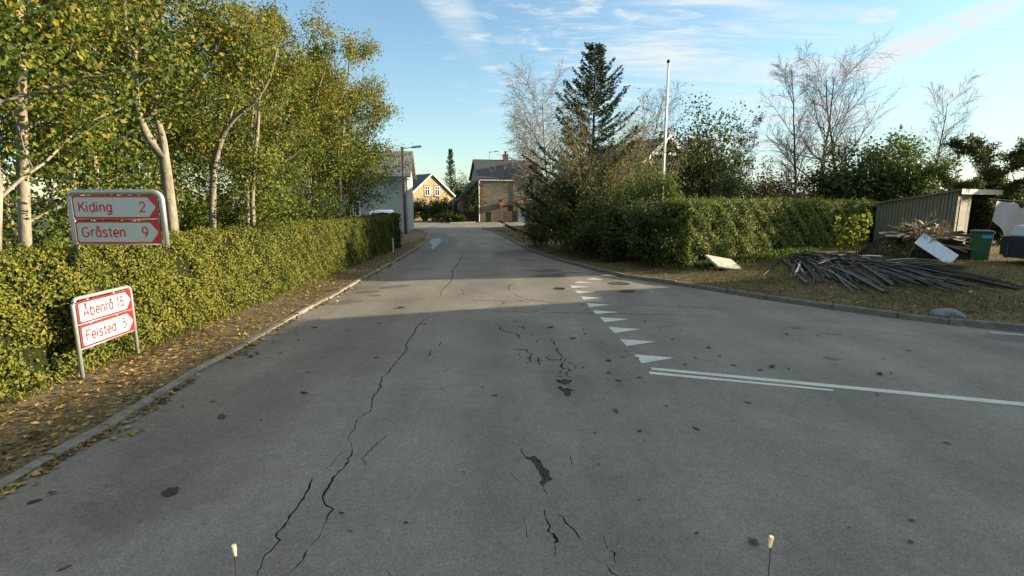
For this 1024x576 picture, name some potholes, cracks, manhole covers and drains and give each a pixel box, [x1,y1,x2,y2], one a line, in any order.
crack [257,318,448,575]
crack [544,511,581,557]
pothole [526,456,553,486]
